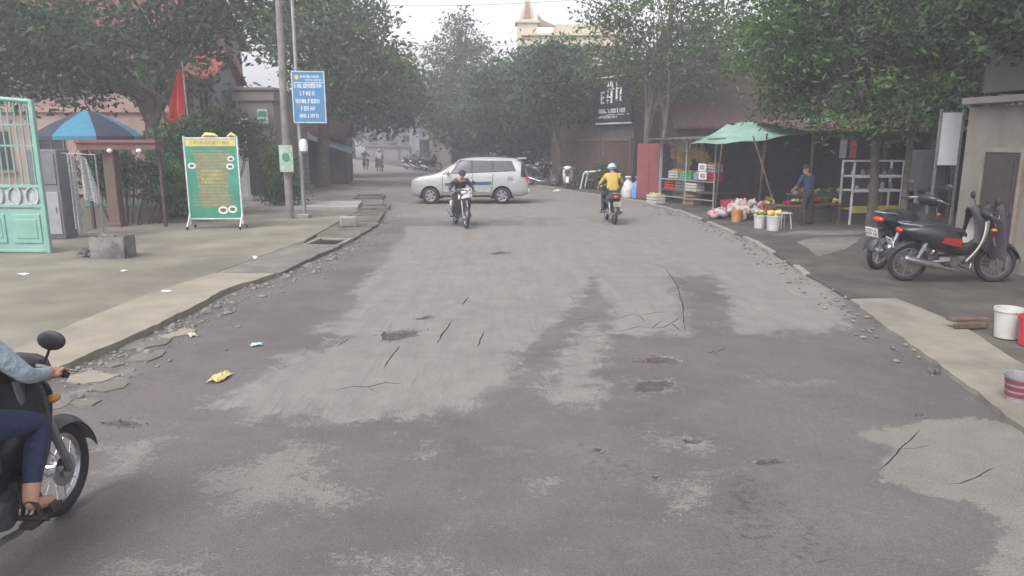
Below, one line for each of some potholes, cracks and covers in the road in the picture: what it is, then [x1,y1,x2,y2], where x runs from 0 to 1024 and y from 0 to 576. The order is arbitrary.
pothole [631,377,681,394]
pothole [99,417,149,429]
pothole [375,328,429,343]
crack [339,346,400,392]
crack [945,468,993,484]
crack [878,429,929,471]
pothole [751,458,795,466]
pothole [629,353,688,365]
crack [616,269,685,332]
